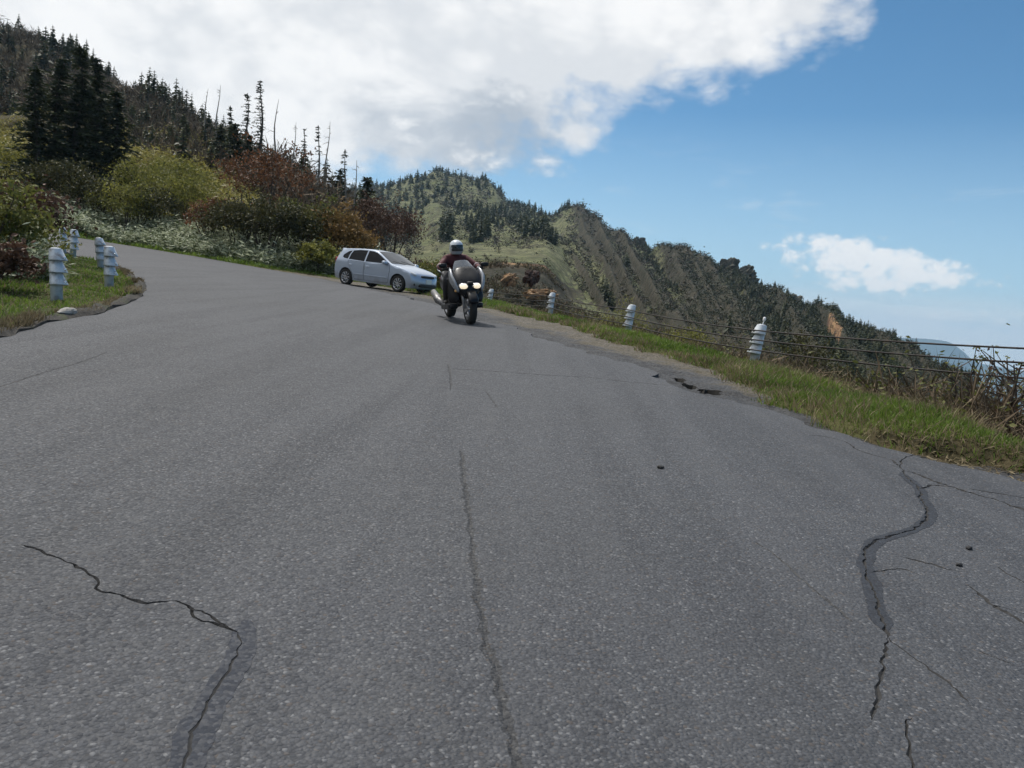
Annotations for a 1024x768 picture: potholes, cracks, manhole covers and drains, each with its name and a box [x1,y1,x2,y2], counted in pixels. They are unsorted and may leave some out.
crack [756,435,1024,768]
crack [447,363,659,390]
crack [23,545,257,768]
crack [459,451,524,768]
crack [0,352,107,387]
